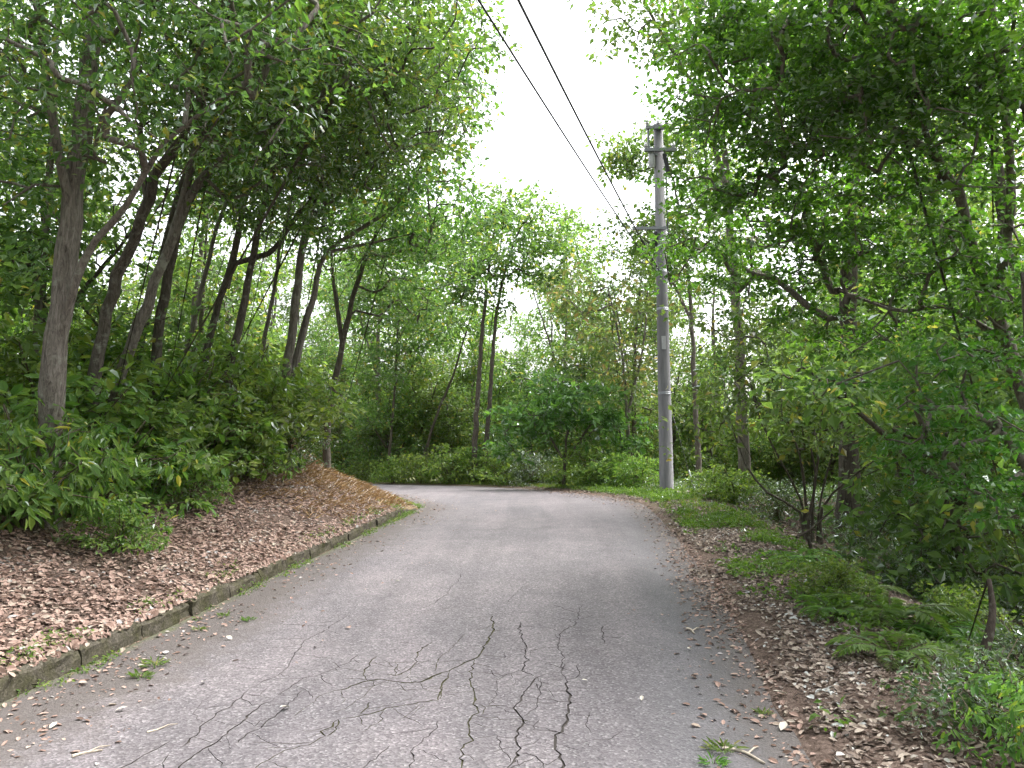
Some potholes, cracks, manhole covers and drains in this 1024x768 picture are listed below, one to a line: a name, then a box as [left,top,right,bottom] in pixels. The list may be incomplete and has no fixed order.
crack [121,606,623,768]
